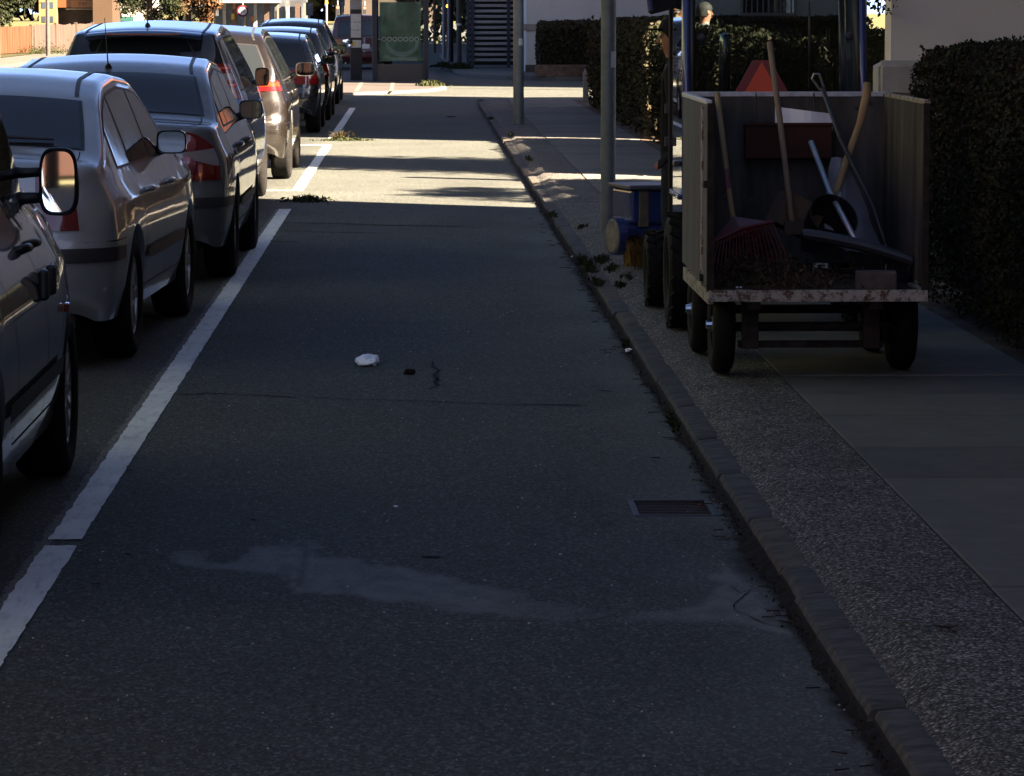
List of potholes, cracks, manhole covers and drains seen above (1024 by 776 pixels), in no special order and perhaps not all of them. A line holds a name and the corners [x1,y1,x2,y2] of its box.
crack [730,586,779,627]
crack [194,361,565,405]
